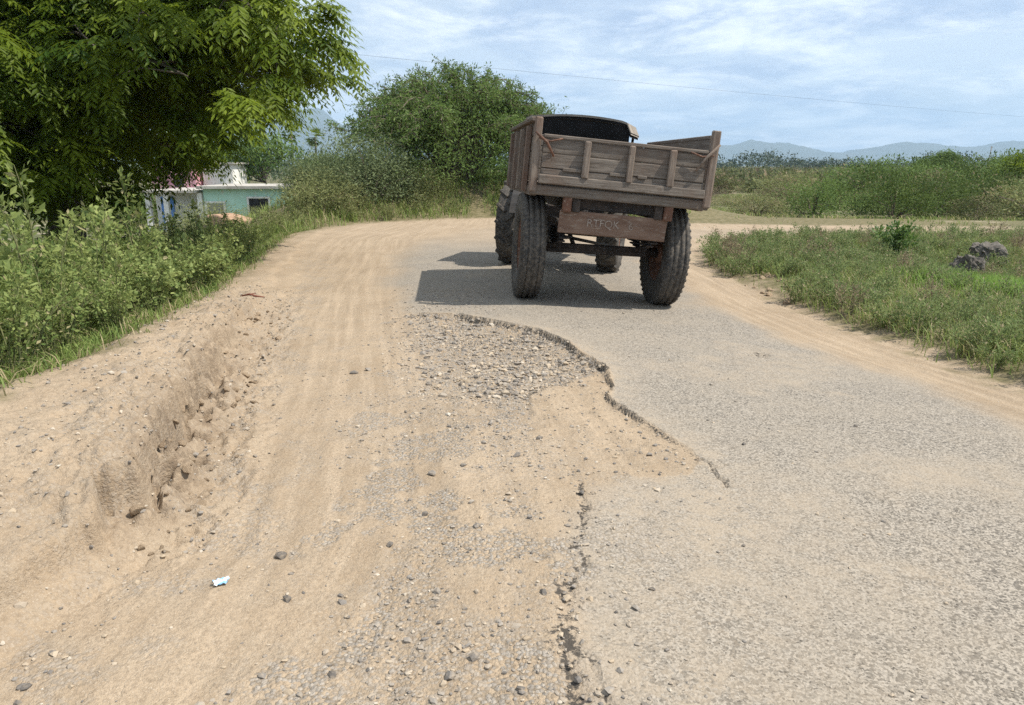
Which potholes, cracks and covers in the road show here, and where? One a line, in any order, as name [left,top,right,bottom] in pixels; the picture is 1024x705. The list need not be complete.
pothole [375,312,705,479]
crack [547,481,623,705]
